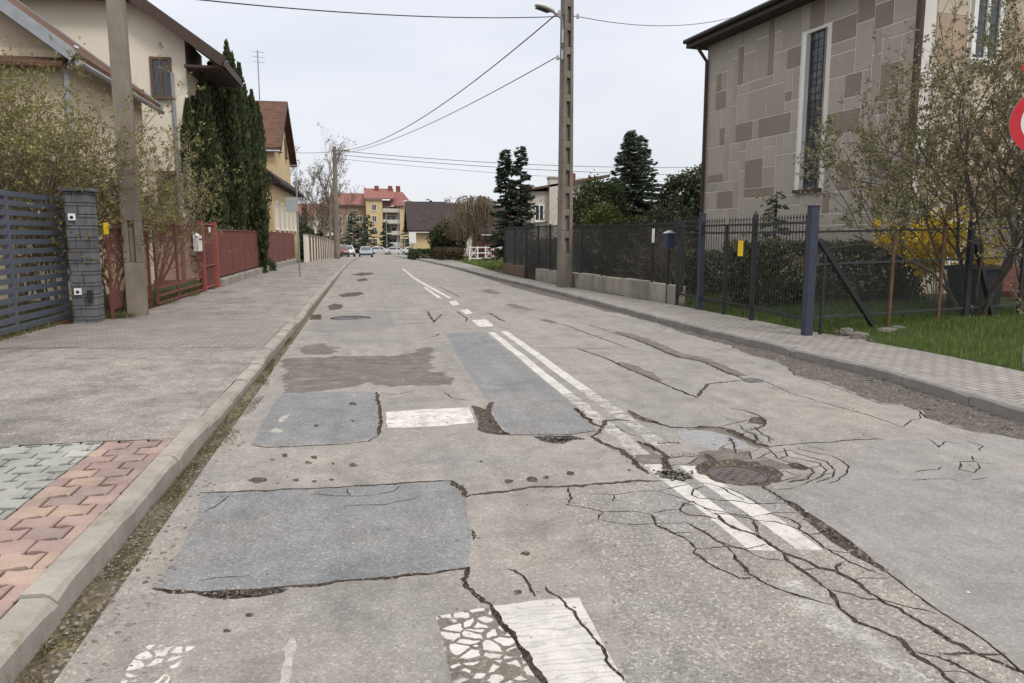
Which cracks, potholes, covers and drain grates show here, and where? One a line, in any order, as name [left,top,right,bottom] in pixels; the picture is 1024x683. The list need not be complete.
manhole cover [695,459,784,486]
crack [411,287,468,338]
pothole [471,401,503,435]
crack [467,320,1024,683]
